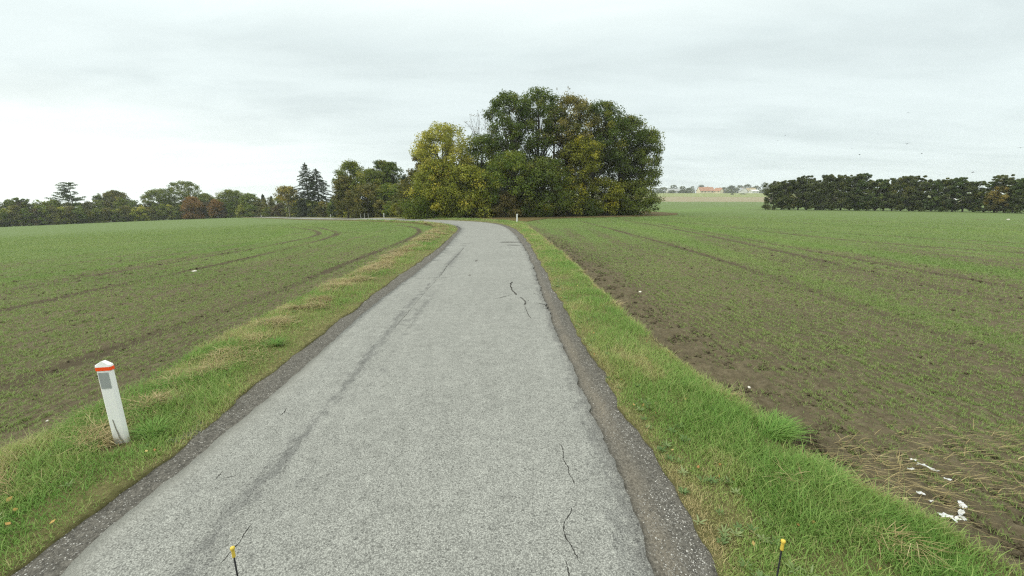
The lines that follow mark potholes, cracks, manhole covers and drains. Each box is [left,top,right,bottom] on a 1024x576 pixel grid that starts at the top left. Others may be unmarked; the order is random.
crack [495,282,549,318]
crack [563,508,579,576]
